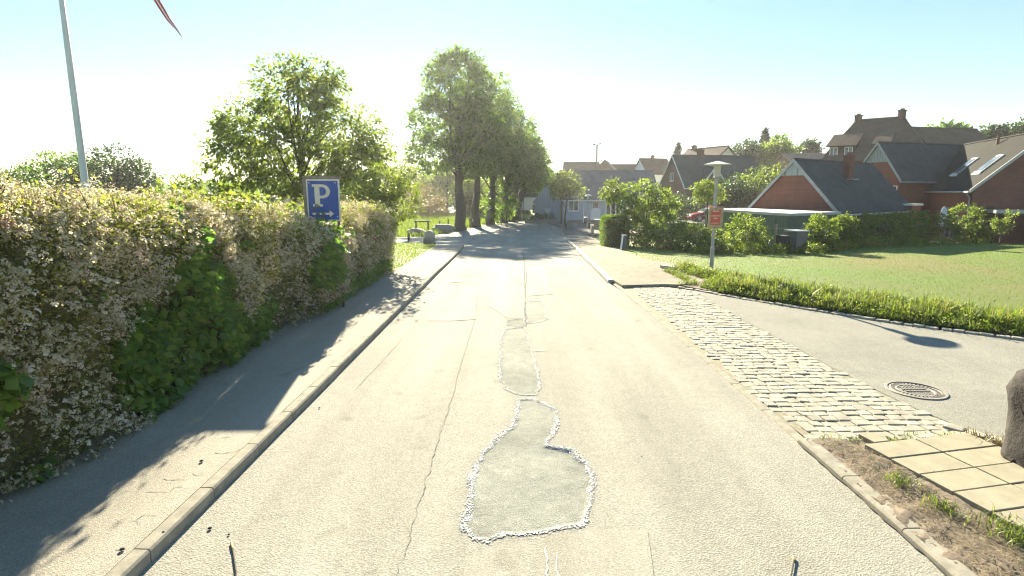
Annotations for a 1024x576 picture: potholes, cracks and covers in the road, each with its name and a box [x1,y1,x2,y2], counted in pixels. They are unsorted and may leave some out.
crack [394,292,478,576]
manhole cover [884,381,949,400]
